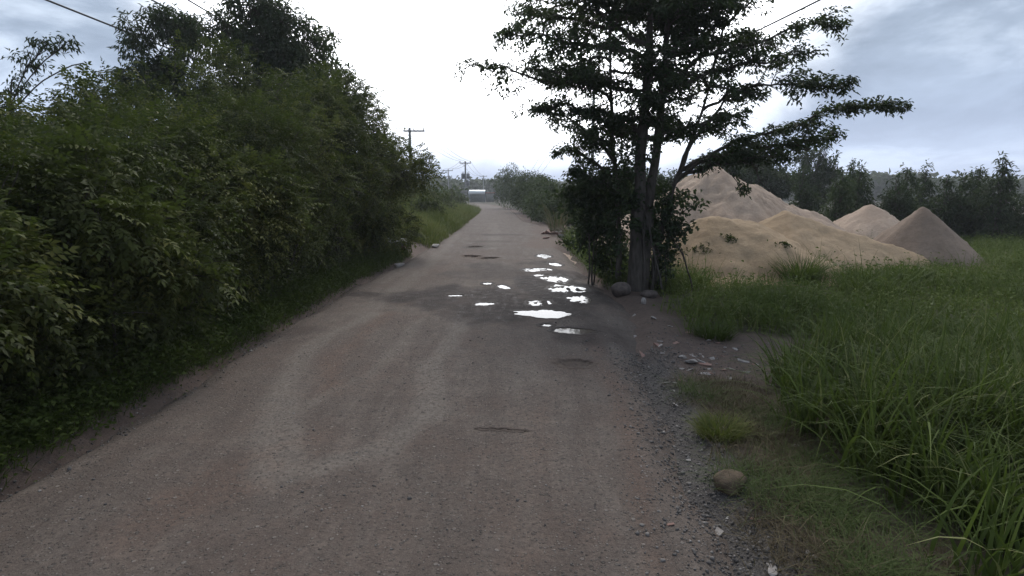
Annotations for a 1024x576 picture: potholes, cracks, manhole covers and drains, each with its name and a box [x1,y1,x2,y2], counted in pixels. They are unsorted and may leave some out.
pothole [508,308,577,319]
pothole [561,293,602,304]
pothole [544,283,593,294]
pothole [546,326,603,335]
pothole [523,299,557,307]
pothole [551,357,599,370]
